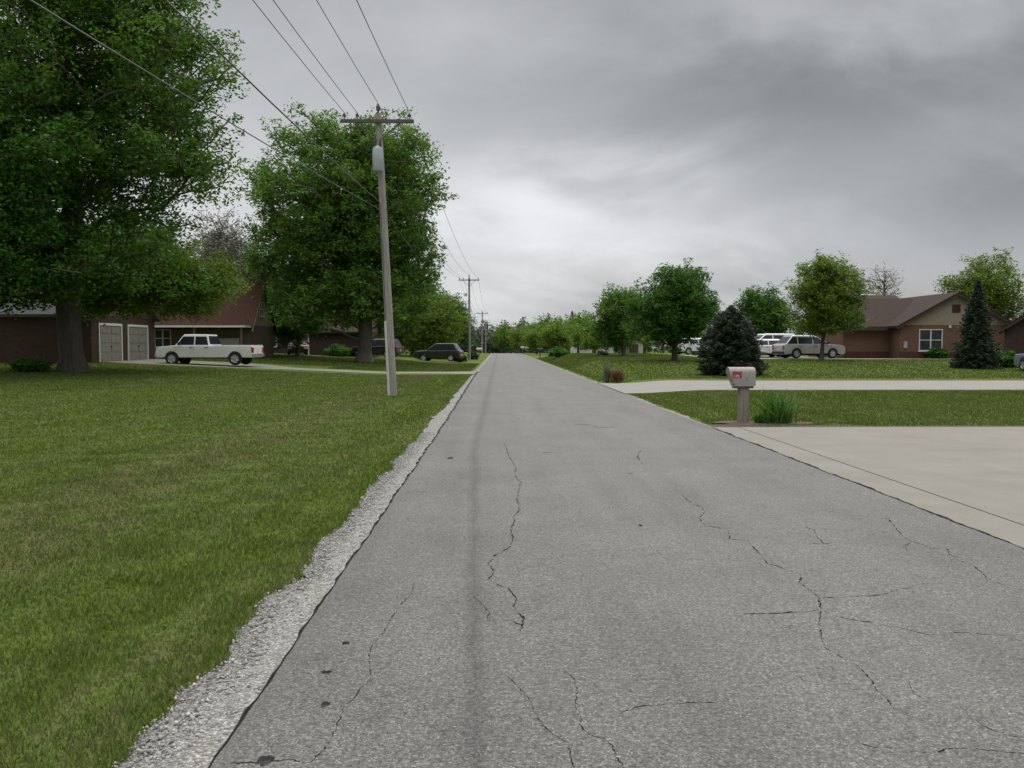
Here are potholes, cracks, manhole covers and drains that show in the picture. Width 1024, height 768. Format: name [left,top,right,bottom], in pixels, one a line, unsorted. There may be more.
crack [508,667,623,768]
crack [855,706,1024,754]
crack [621,702,717,713]
crack [474,443,525,631]
crack [682,495,1007,711]
